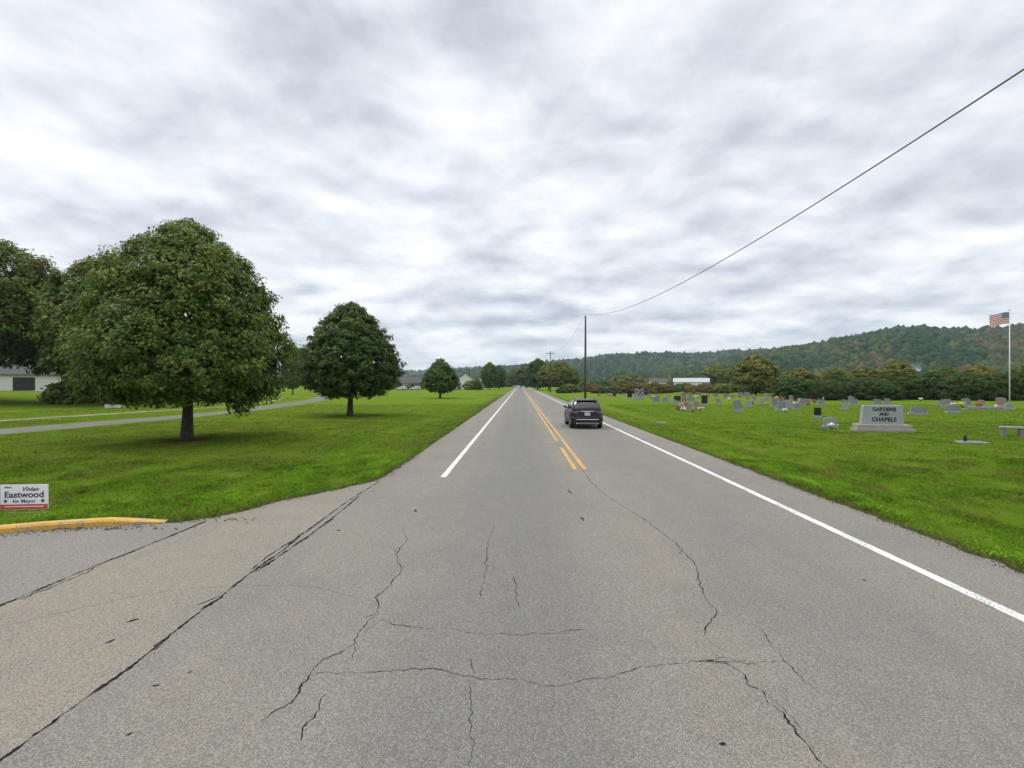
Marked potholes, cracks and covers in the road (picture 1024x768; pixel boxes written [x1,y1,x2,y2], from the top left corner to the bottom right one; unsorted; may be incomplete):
crack [263,529,582,744]
crack [582,469,717,634]
crack [311,657,828,768]
